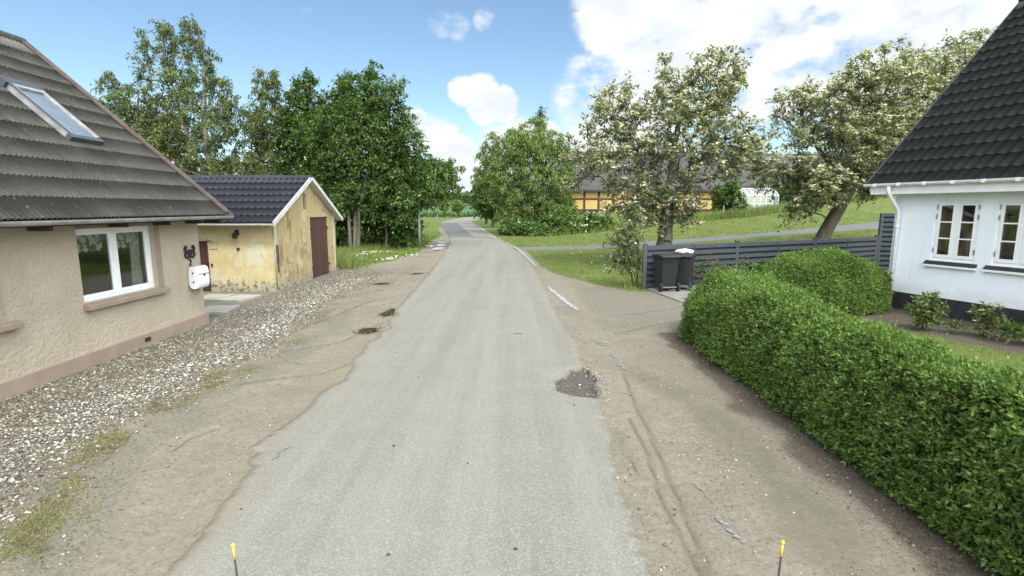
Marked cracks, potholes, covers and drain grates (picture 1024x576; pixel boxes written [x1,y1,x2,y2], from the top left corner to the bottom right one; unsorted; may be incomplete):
pothole [354,326,389,334]
pothole [555,367,602,398]
